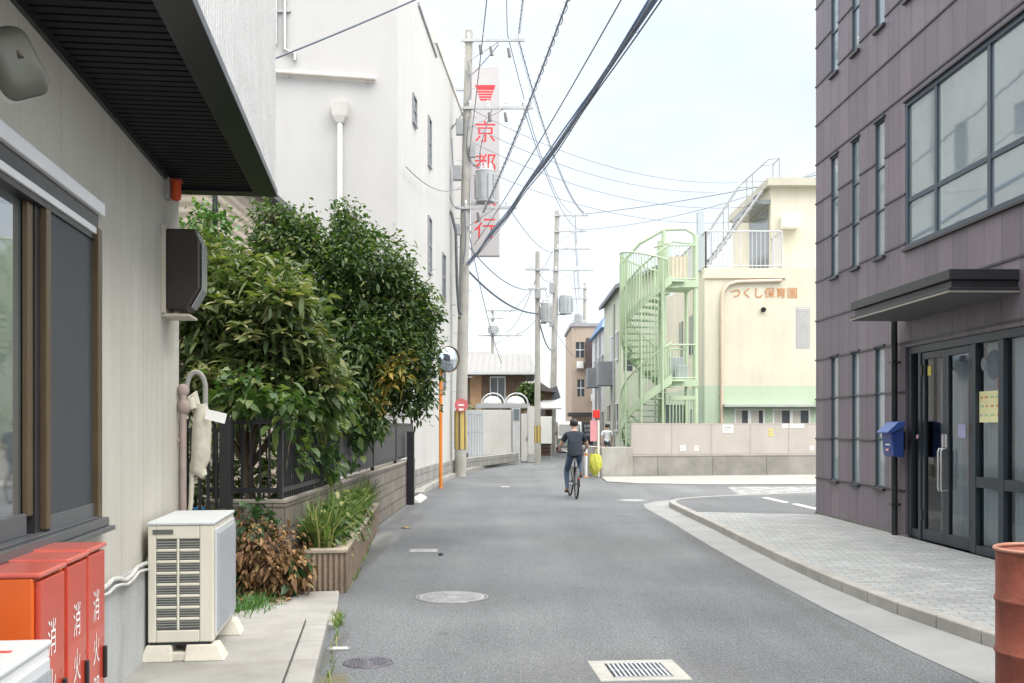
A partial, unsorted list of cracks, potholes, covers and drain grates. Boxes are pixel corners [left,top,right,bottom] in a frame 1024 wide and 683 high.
manhole cover [415,591,489,603]
drain grate [587,659,692,682]
manhole cover [342,656,394,668]
